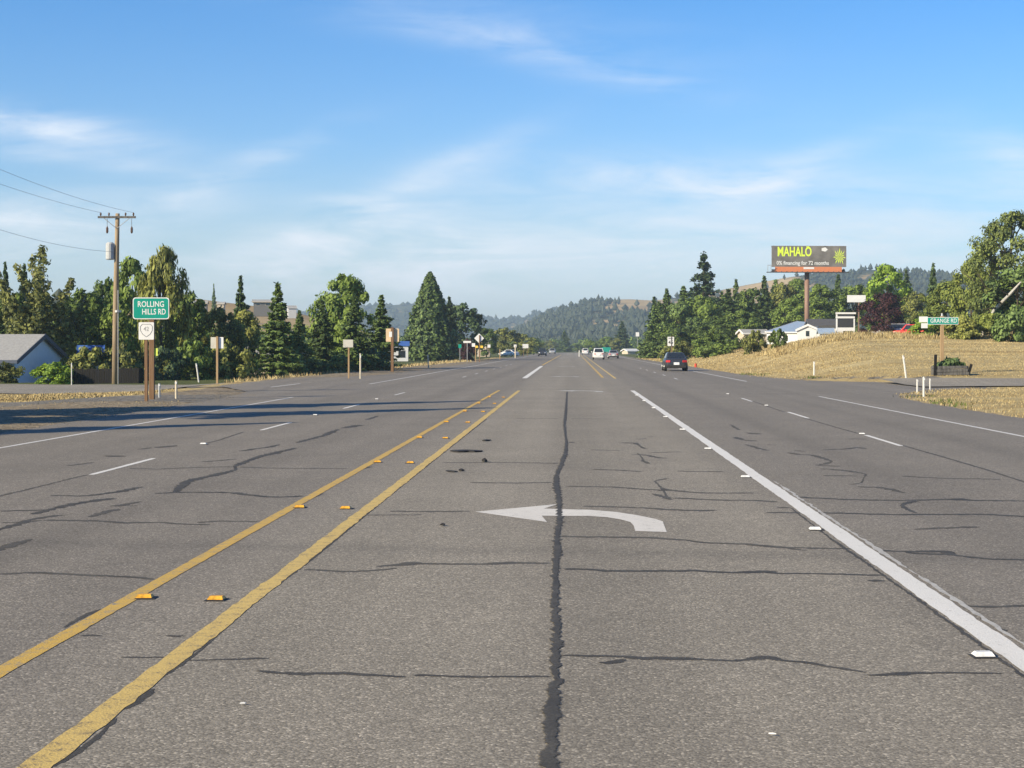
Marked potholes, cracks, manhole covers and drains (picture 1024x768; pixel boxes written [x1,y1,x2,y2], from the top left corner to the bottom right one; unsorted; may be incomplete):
crack [0,572,152,580]
crack [80,419,1024,678]
